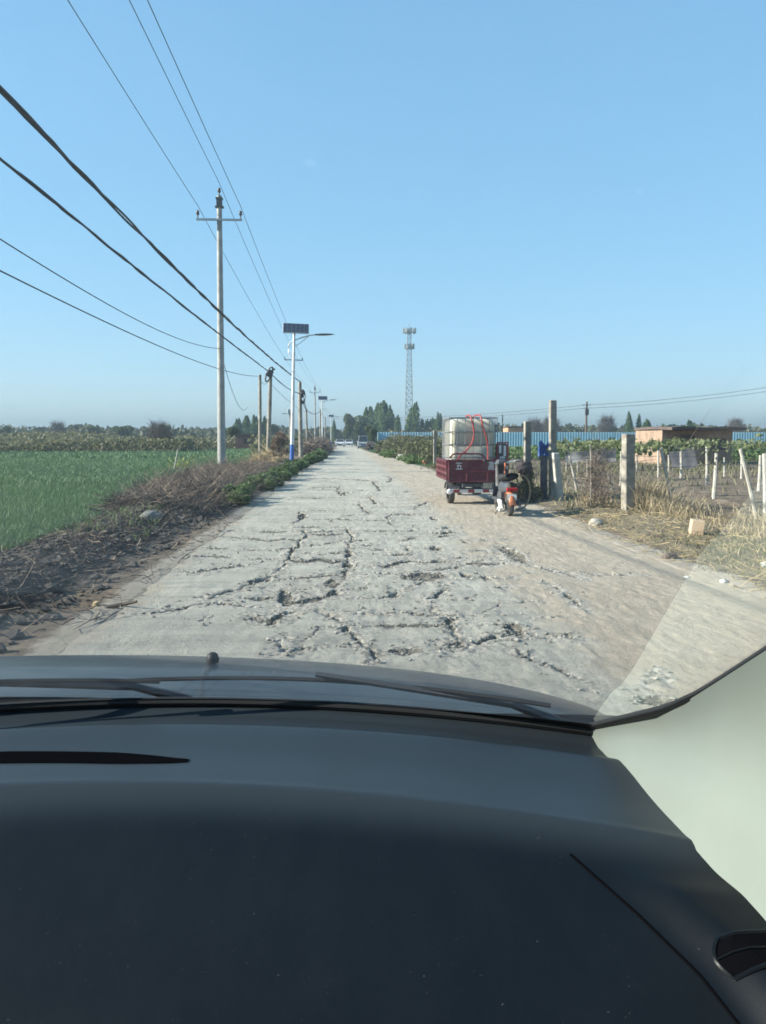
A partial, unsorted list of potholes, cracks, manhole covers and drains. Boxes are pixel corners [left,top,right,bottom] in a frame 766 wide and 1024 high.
crack [522,566,625,618]
crack [518,654,573,676]
crack [477,588,535,645]
crack [151,476,505,659]
